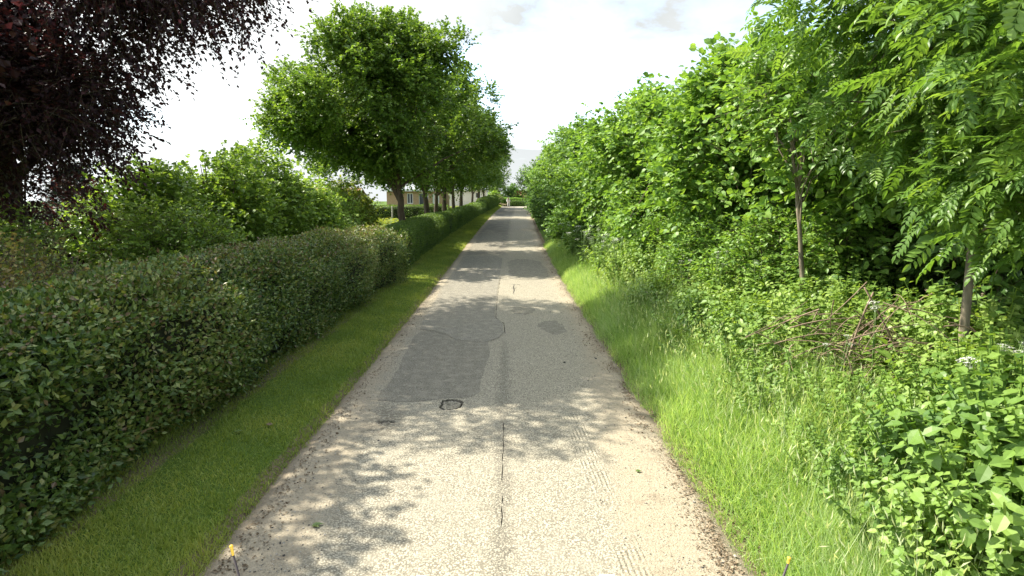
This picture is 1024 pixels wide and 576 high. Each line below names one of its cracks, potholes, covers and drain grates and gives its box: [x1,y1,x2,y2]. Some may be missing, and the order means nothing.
pothole [439,399,464,410]
